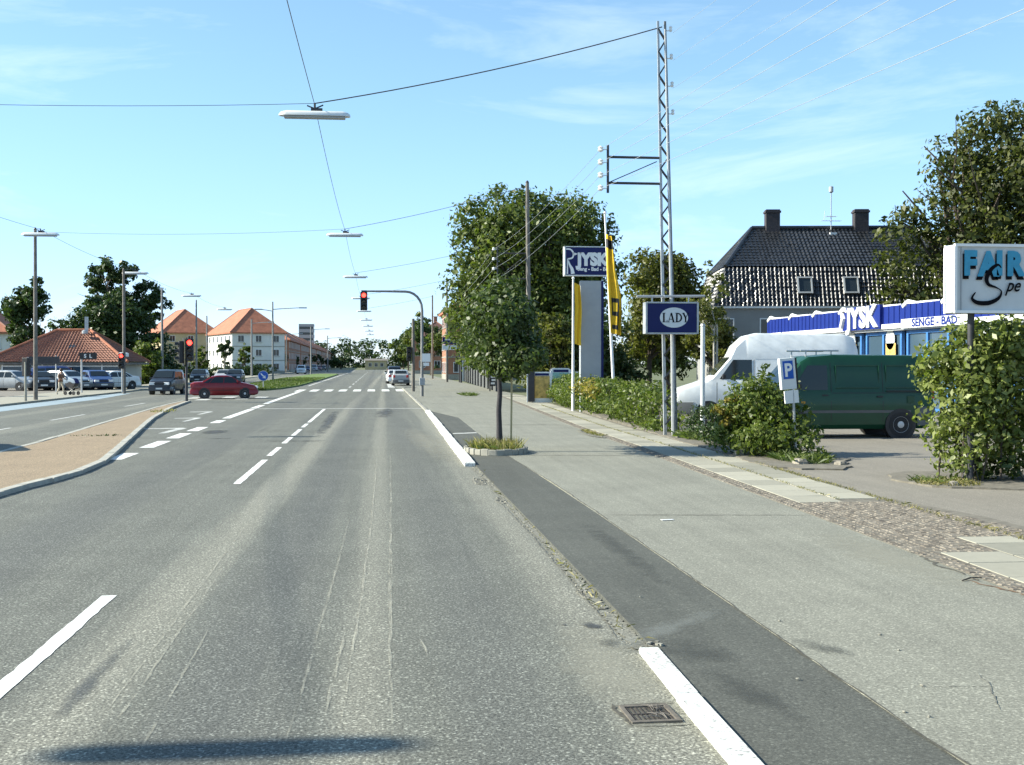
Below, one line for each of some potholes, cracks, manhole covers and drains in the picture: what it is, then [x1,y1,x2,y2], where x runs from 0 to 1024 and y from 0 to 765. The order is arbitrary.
crack [911,552,1024,595]
